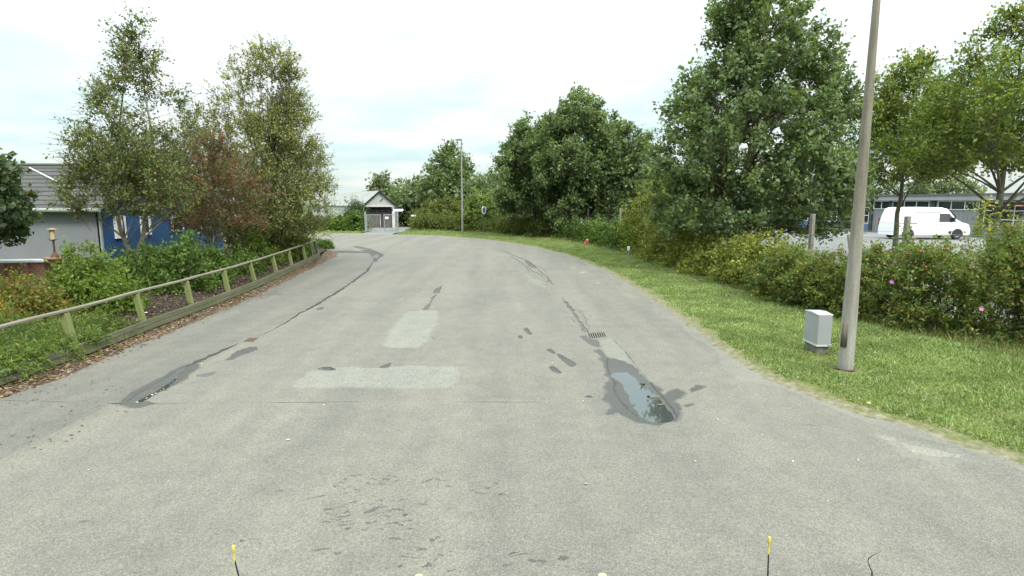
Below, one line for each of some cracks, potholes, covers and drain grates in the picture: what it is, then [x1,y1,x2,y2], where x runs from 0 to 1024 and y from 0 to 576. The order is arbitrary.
pothole [127,368,187,404]
pothole [600,338,678,423]
